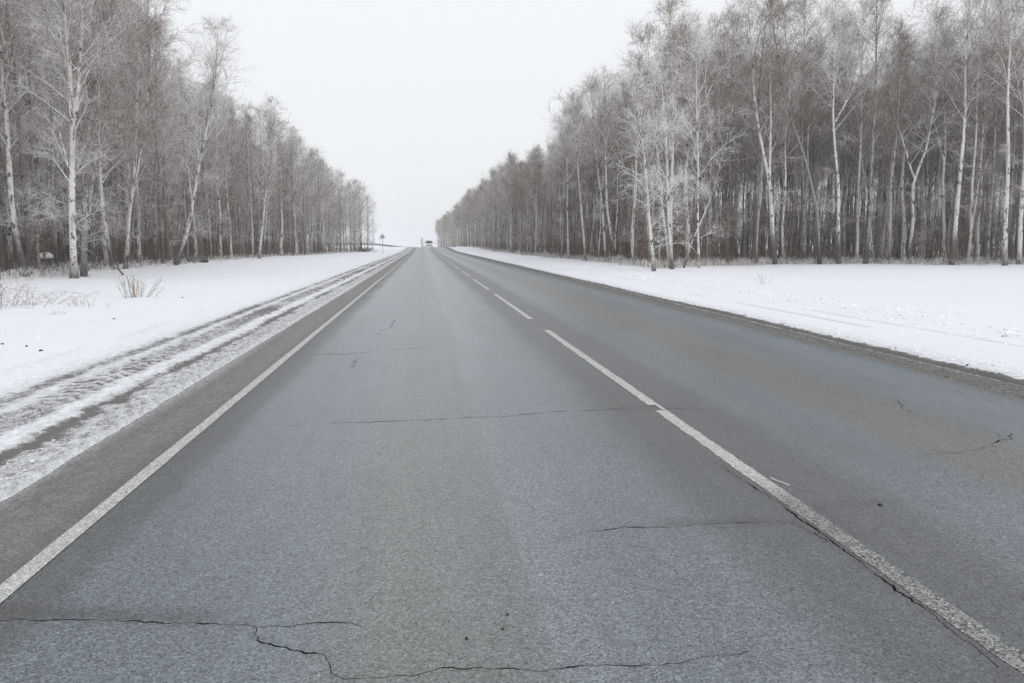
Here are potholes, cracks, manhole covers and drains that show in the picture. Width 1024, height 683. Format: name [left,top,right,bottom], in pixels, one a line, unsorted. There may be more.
crack [335,408,683,423]
crack [563,466,999,667]
